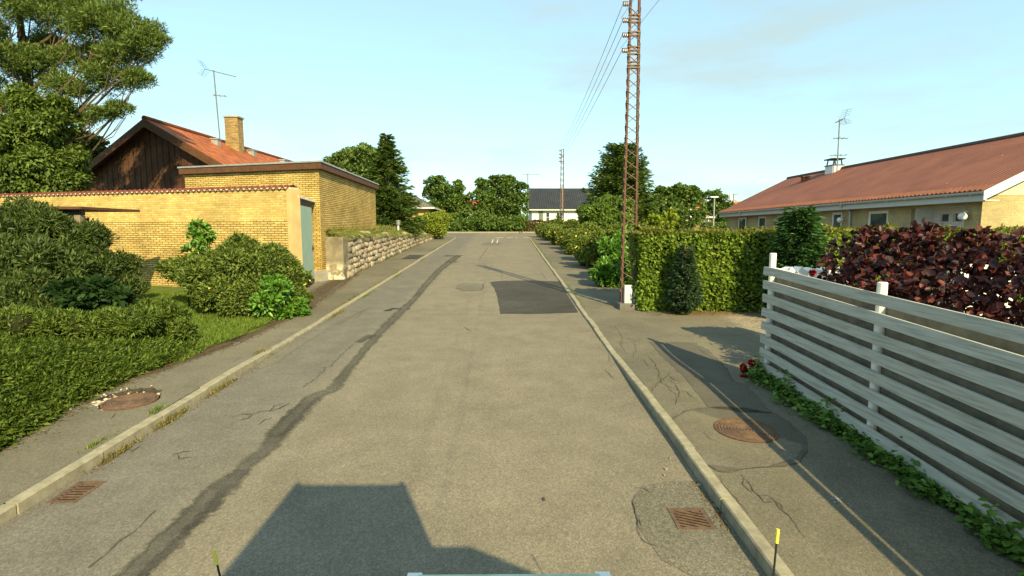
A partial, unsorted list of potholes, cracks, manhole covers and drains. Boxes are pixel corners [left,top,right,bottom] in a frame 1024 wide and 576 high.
crack [706,453,806,537]
drain grate [46,481,106,503]
drain grate [667,508,716,530]
manhole cover [714,418,778,443]
crack [608,327,697,416]
manhole cover [100,392,159,411]
